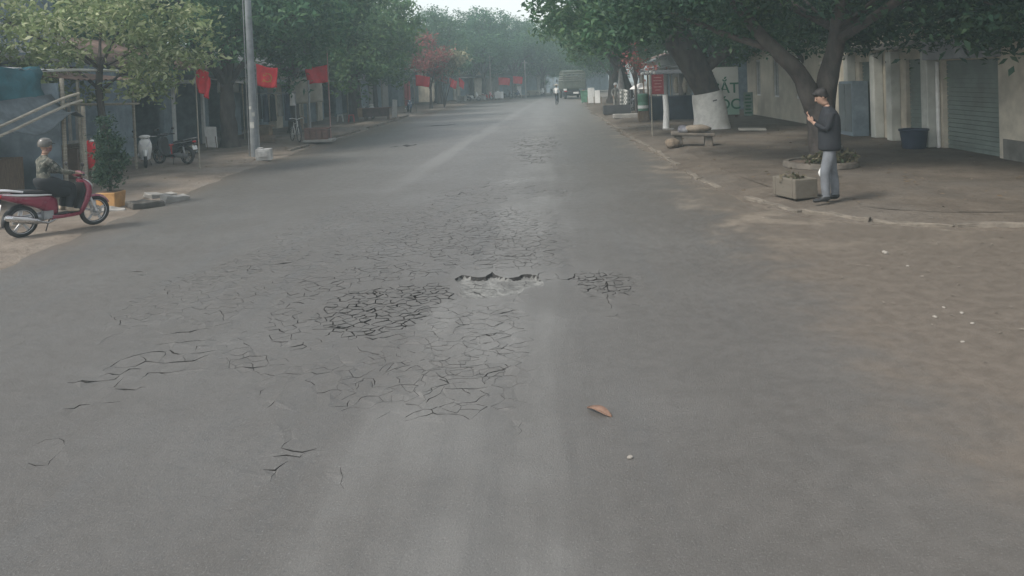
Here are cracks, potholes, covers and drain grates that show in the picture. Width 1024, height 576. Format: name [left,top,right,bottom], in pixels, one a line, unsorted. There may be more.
crack [538,271,635,308]
crack [263,430,317,481]
crack [68,328,216,403]
crack [110,181,575,421]
pothole [455,272,544,299]
crack [509,137,553,164]
